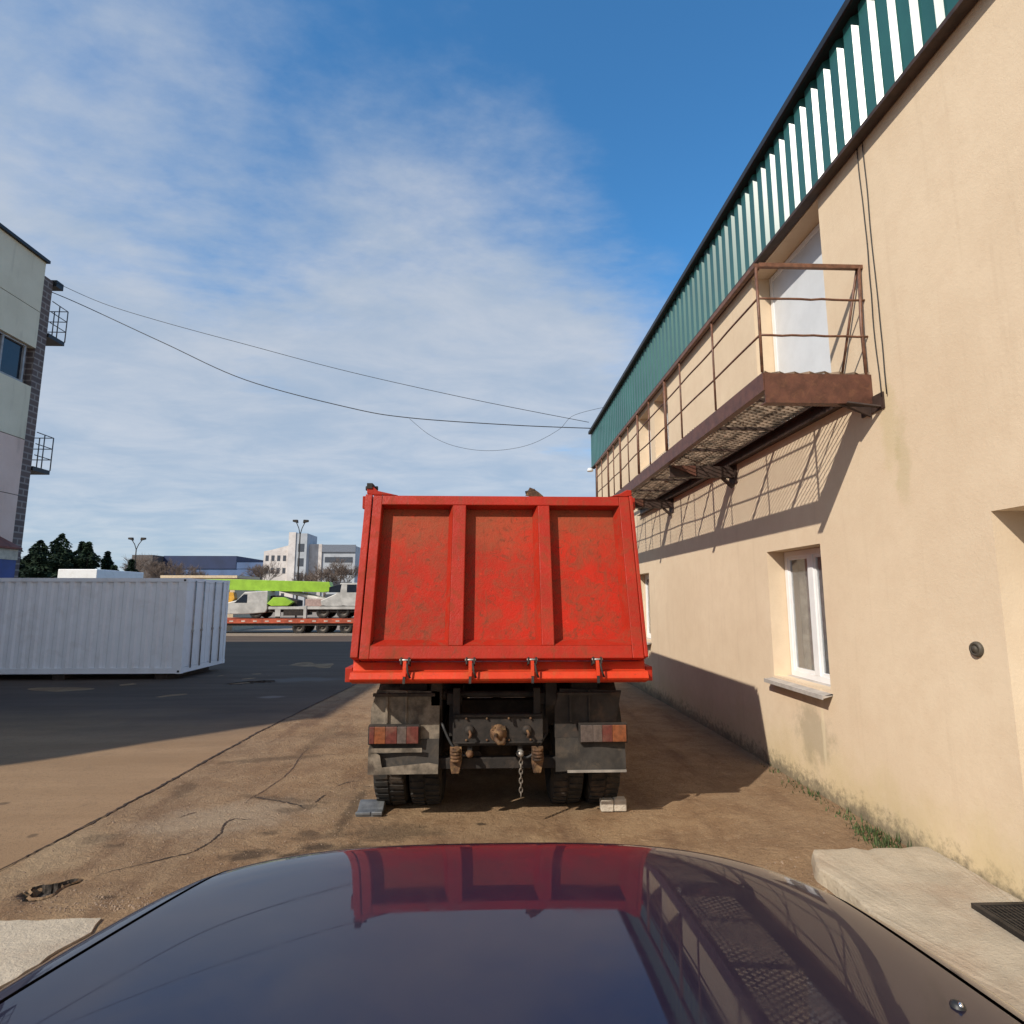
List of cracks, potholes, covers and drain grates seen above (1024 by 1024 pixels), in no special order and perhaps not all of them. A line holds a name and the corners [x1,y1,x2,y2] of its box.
crack [94,748,352,877]
drain grate [971,902,1024,942]
pothole [26,878,82,902]
